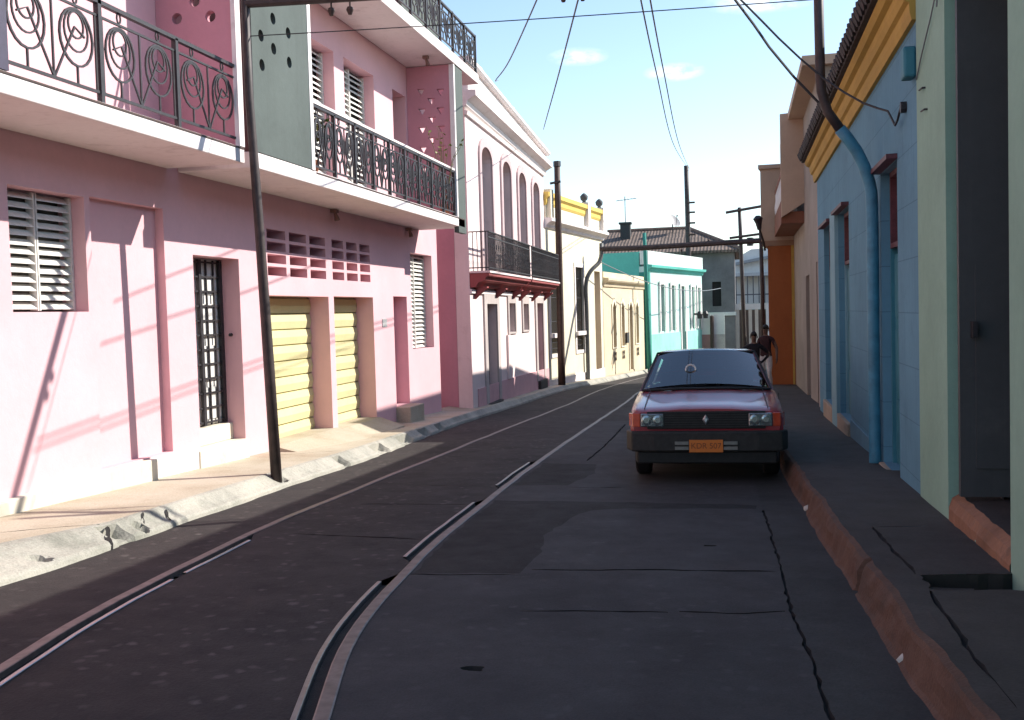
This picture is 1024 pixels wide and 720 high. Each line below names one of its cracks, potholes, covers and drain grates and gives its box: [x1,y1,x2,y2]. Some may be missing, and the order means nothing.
crack [532,511,835,720]
crack [587,424,626,461]
